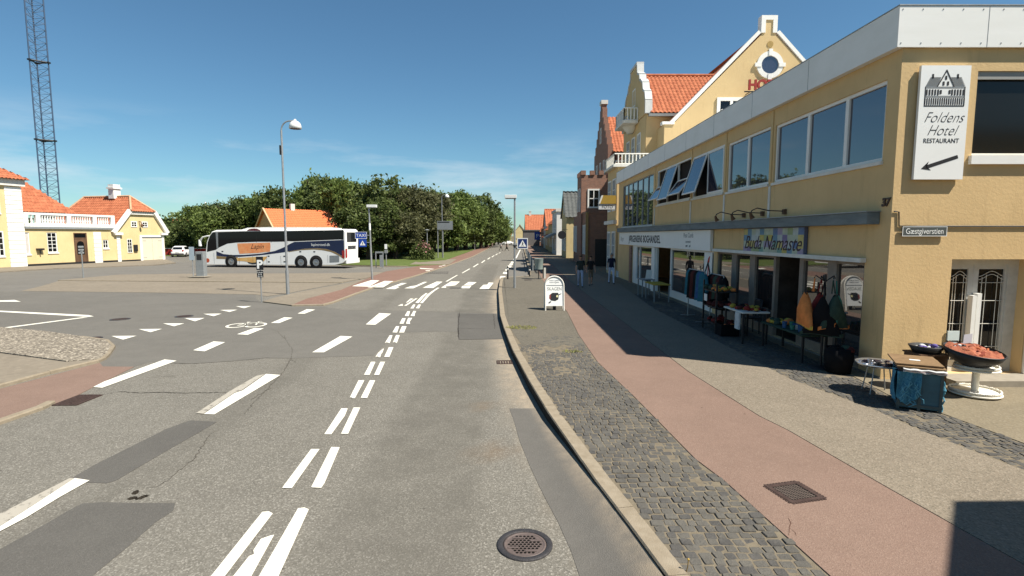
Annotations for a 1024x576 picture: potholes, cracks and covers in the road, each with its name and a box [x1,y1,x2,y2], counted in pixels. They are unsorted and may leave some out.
crack [245,331,293,413]
manhole cover [497,529,553,562]
